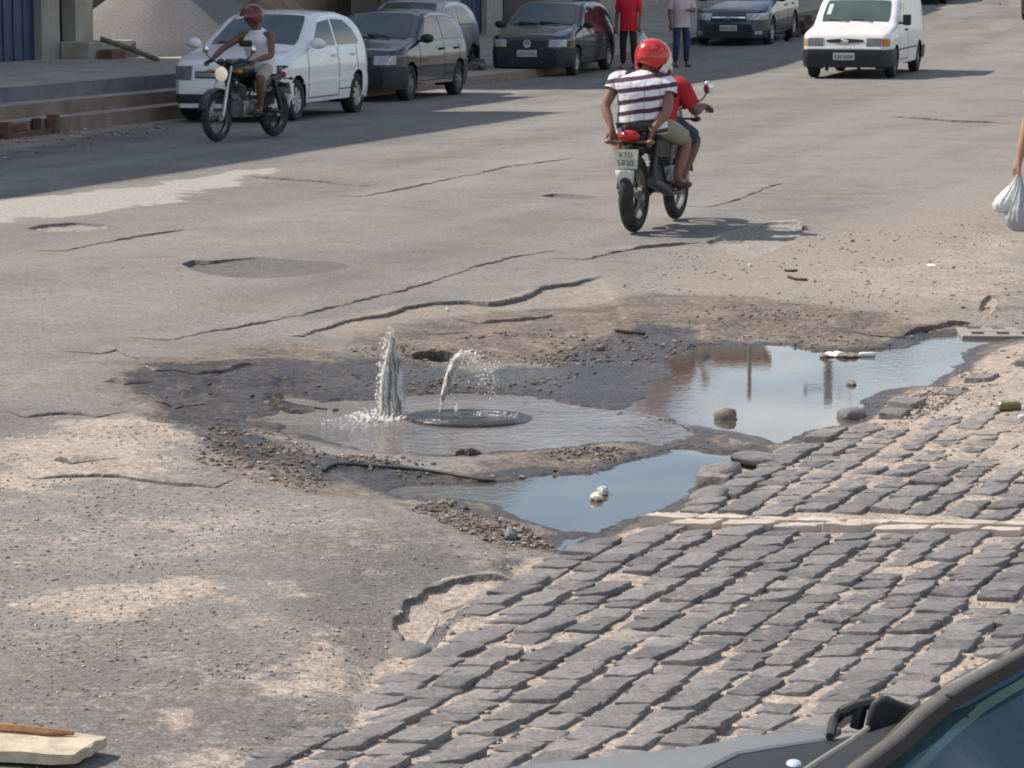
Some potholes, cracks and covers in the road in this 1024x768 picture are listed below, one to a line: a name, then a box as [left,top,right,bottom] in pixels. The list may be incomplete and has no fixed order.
crack [686,183,783,207]
pothole [400,350,465,363]
manhole cover [407,409,533,428]
crack [4,229,701,418]
crack [895,116,1007,124]
crack [17,452,238,488]
drain grate [956,325,1024,339]
pothole [19,222,119,233]
pothole [382,573,510,658]
pothole [974,295,1004,318]
